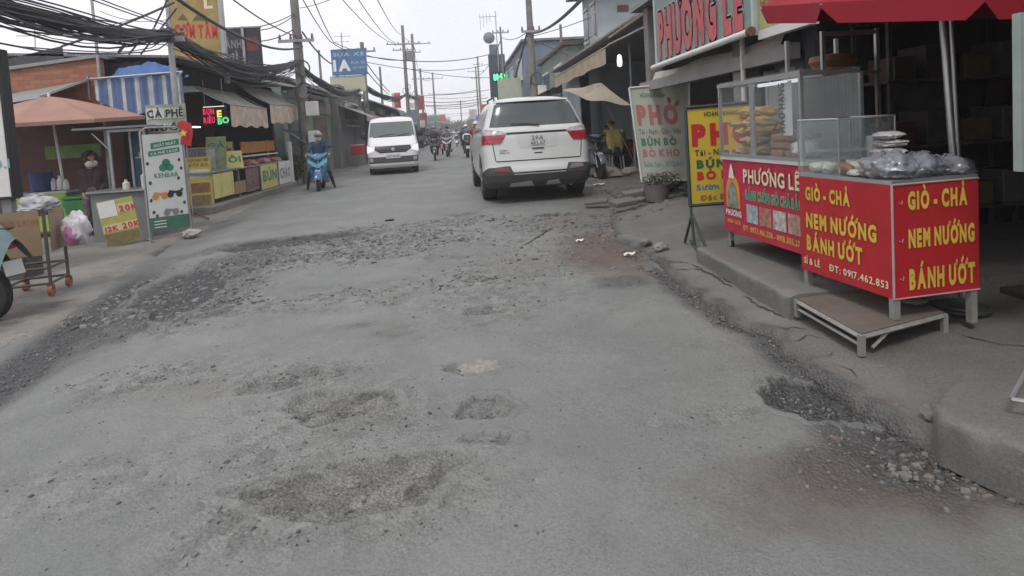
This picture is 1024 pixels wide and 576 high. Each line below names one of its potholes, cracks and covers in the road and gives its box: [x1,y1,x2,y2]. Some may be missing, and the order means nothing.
pothole [220,364,359,400]
pothole [457,272,526,285]
pothole [455,304,522,318]
pothole [444,389,529,424]
pothole [264,384,417,435]
pothole [442,427,530,450]
pothole [119,266,232,328]
pothole [210,230,382,254]
pothole [748,372,883,432]
pothole [432,361,514,380]
pothole [212,442,502,534]
crack [664,260,857,377]
